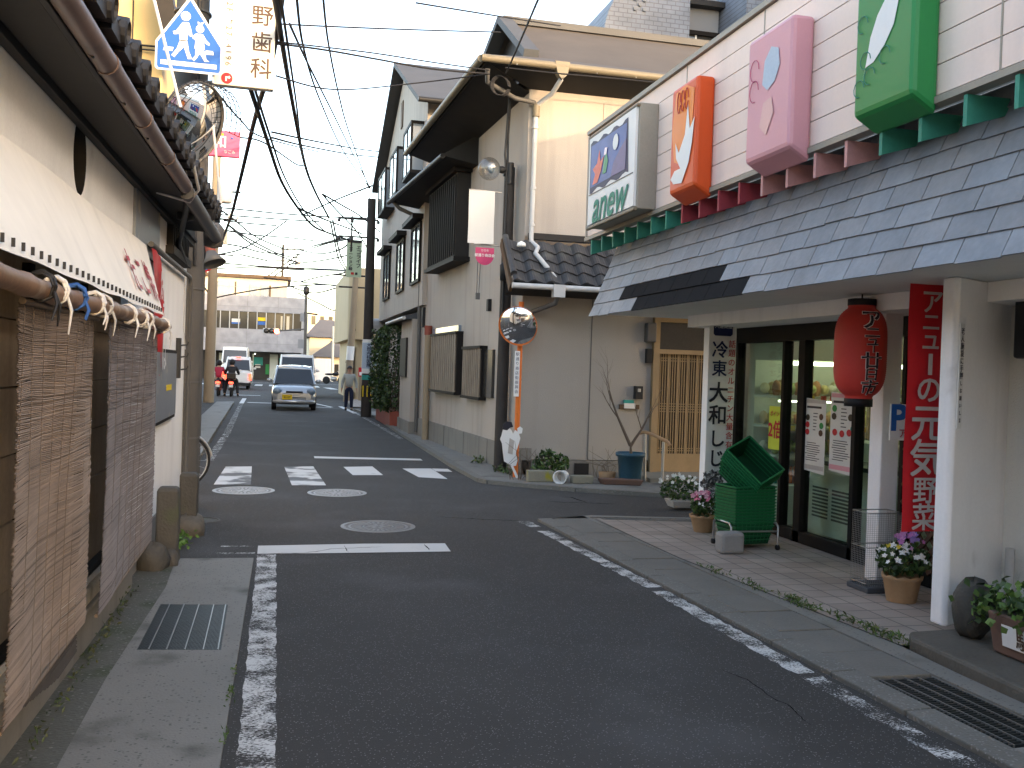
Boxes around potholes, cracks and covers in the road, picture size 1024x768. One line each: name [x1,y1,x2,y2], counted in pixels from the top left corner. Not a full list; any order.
crack [728,672,807,722]
manhole cover [212,486,275,494]
manhole cover [307,489,367,497]
drain grate [137,604,228,650]
manhole cover [341,520,415,533]
drain grate [878,676,1024,748]
